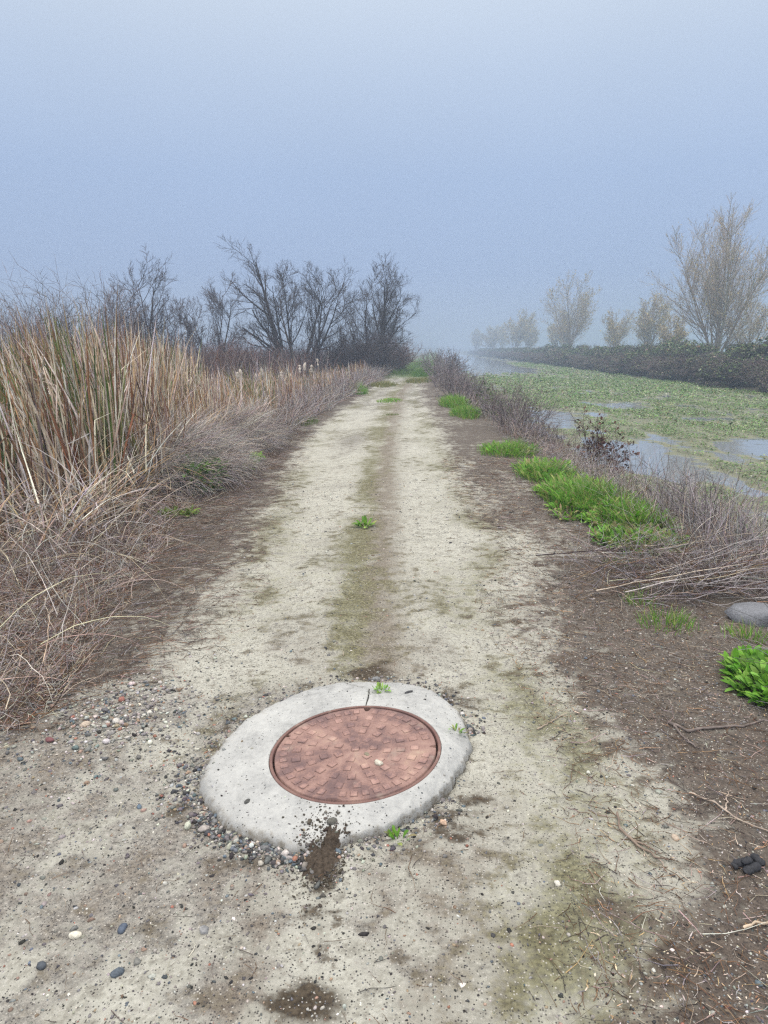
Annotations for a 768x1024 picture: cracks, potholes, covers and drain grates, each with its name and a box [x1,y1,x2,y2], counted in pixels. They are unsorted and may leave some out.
manhole cover [269,706,441,805]
